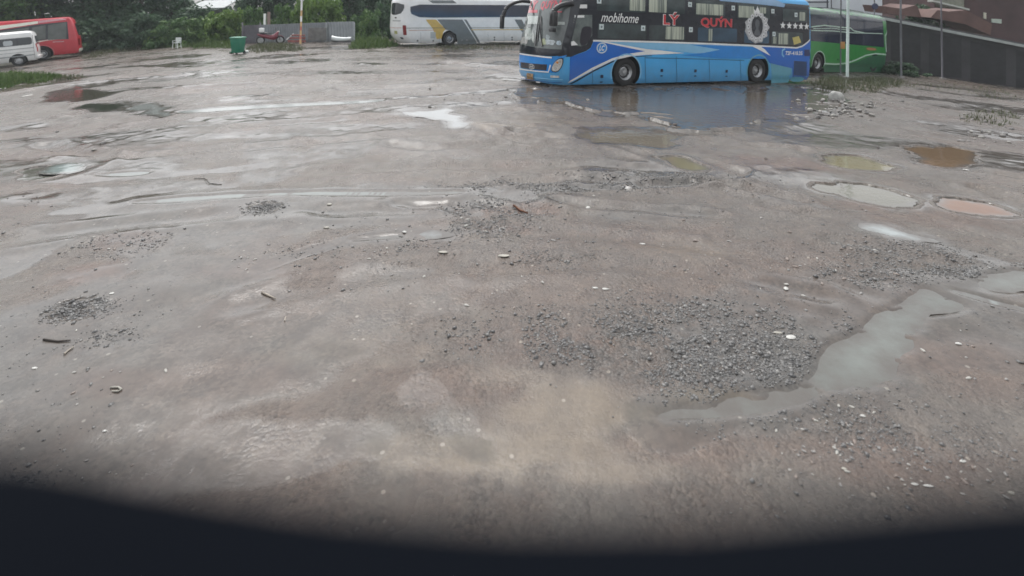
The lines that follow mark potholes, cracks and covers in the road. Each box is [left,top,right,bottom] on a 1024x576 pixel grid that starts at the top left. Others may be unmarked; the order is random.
pothole [653,154,715,172]
pothole [928,195,1024,219]
pothole [806,180,927,210]
pothole [48,298,96,320]
pothole [897,144,985,169]
pothole [9,164,63,182]
pothole [816,153,904,172]
